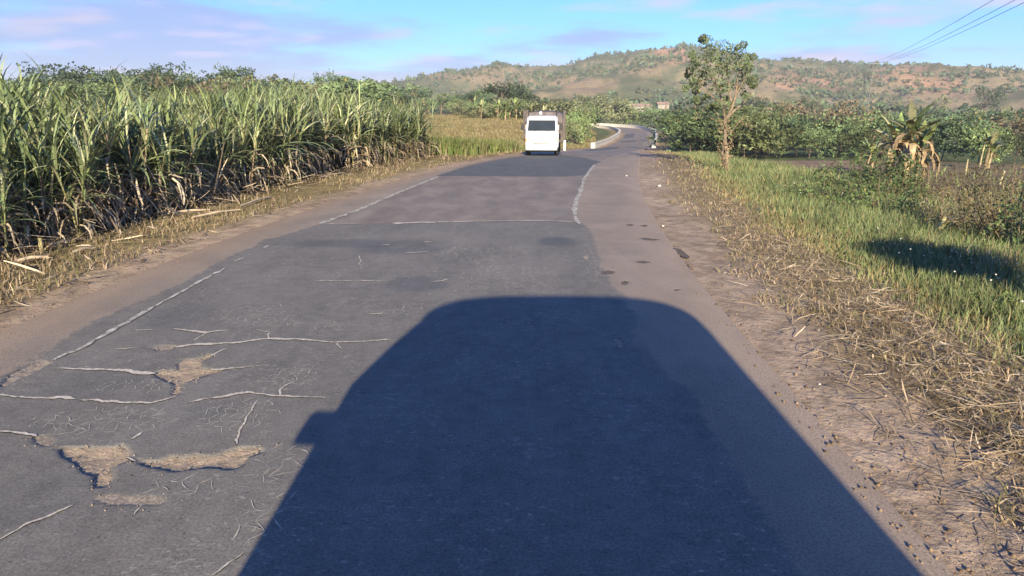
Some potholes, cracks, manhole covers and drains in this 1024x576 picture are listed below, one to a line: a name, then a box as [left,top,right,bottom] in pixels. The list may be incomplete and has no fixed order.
crack [0,283,390,445]
pothole [143,448,262,471]
crack [137,472,213,495]
crack [213,444,310,575]
pothole [94,495,165,505]
pothole [154,355,223,394]
crack [0,505,72,540]
pothole [61,447,131,487]
